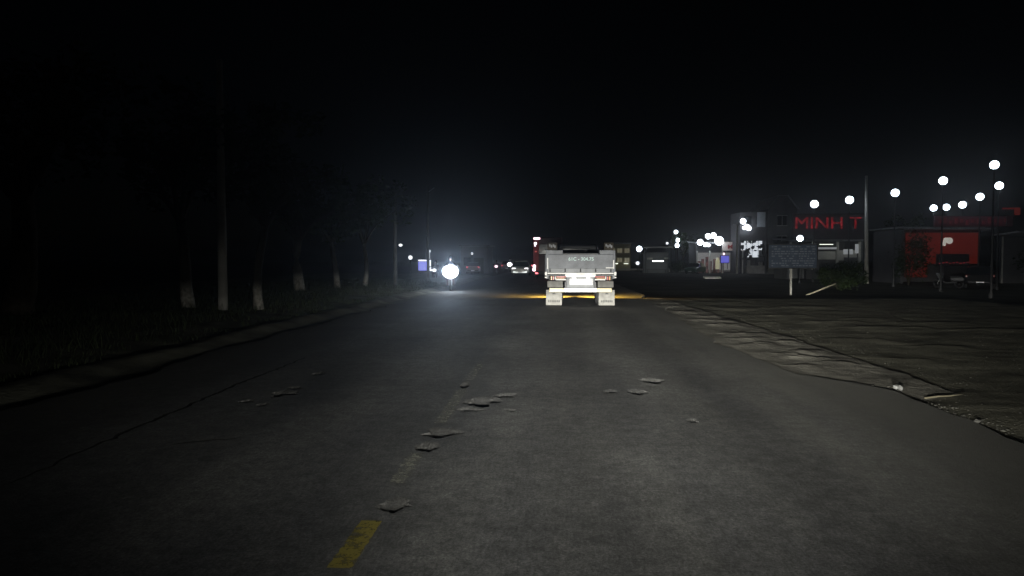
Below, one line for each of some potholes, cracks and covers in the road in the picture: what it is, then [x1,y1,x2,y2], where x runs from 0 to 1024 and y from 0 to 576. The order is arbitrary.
pothole [413,441,442,452]
pothole [419,427,465,439]
crack [11,357,305,483]
pothole [461,396,503,408]
pothole [374,496,417,513]
